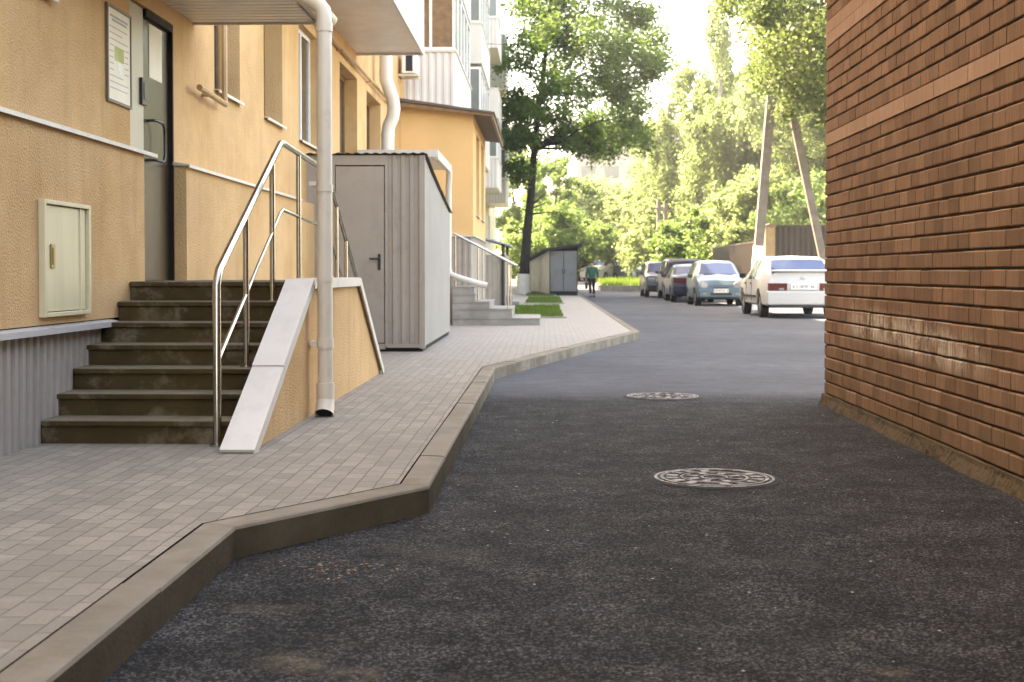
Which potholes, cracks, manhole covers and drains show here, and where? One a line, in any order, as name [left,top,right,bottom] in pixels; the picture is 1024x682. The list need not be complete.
manhole cover [648,468,782,489]
manhole cover [623,392,703,400]
